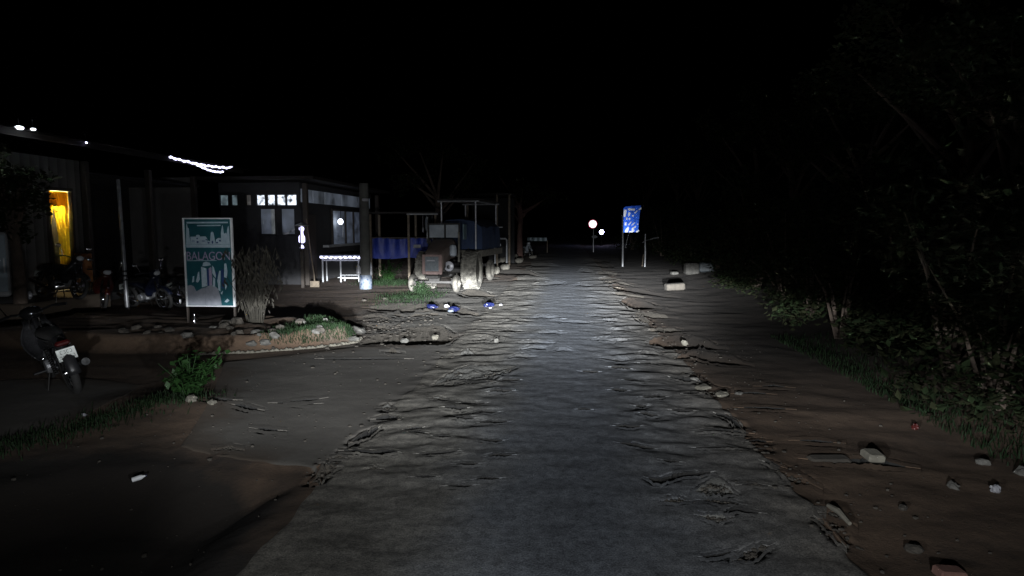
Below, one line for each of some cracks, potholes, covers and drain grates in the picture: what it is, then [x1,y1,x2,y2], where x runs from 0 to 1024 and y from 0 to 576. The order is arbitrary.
crack [338,259,921,521]
crack [693,545,738,562]
